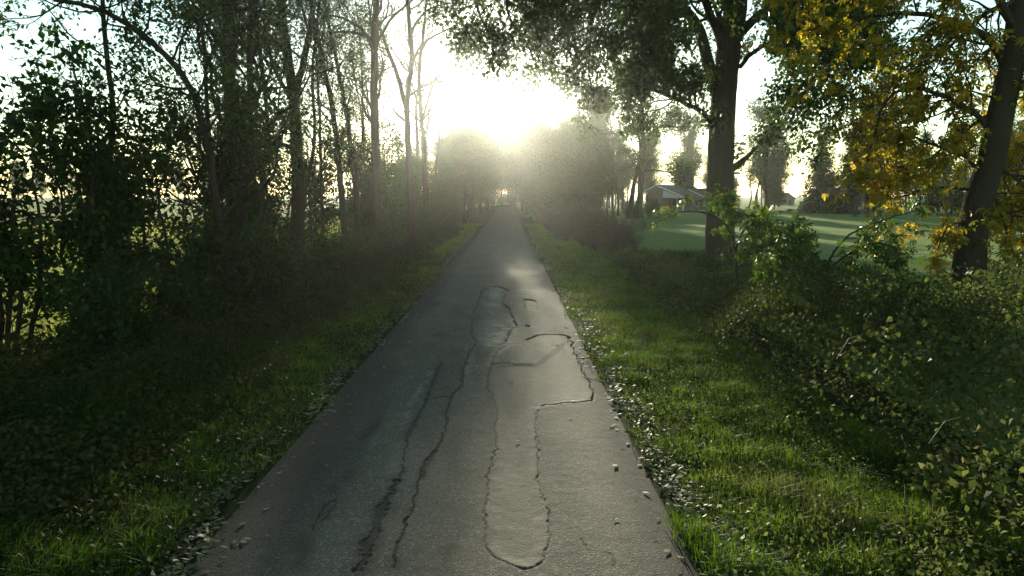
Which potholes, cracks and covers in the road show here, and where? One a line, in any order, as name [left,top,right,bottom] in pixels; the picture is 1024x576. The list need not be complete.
crack [311,325,595,573]
